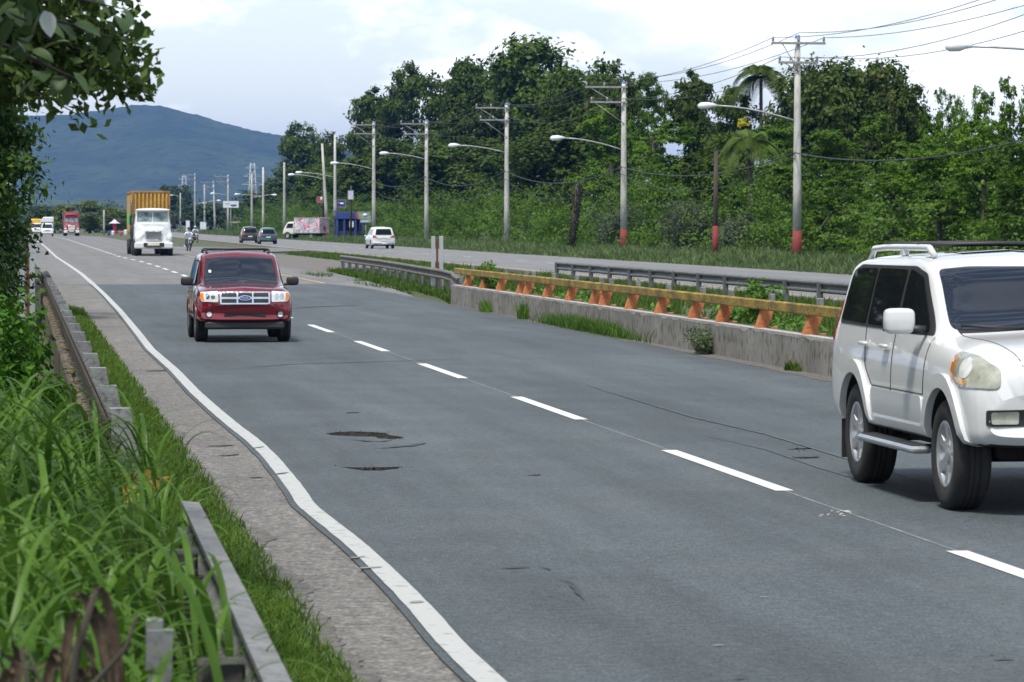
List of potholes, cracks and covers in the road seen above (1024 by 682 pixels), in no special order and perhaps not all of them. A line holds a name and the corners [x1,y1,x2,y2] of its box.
crack [506,566,584,600]
crack [353,439,425,448]
pothole [326,430,403,440]
